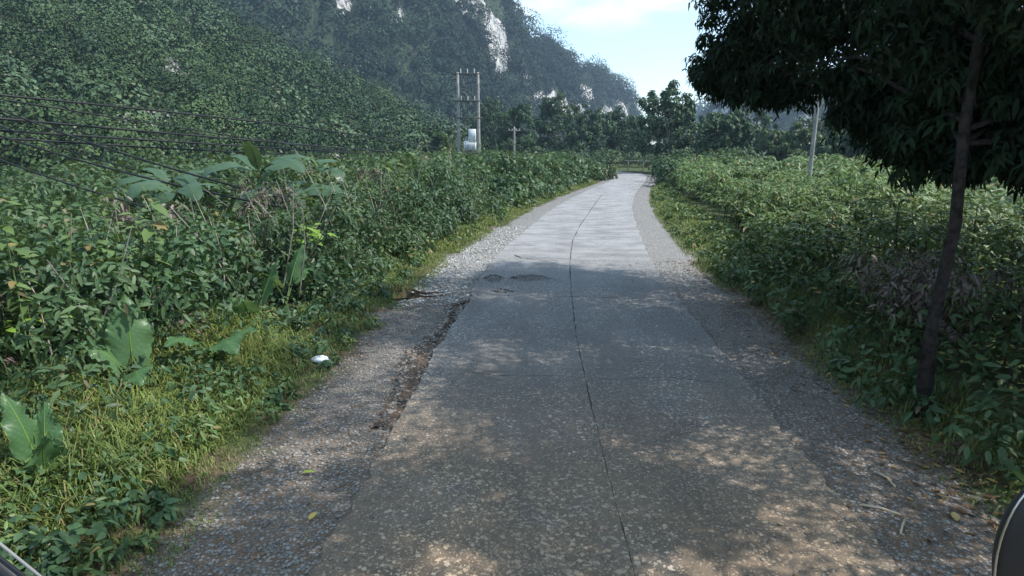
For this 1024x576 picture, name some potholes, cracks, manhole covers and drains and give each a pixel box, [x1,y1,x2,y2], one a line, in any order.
pothole [483,274,504,283]
pothole [369,300,470,430]
pothole [508,274,553,282]
